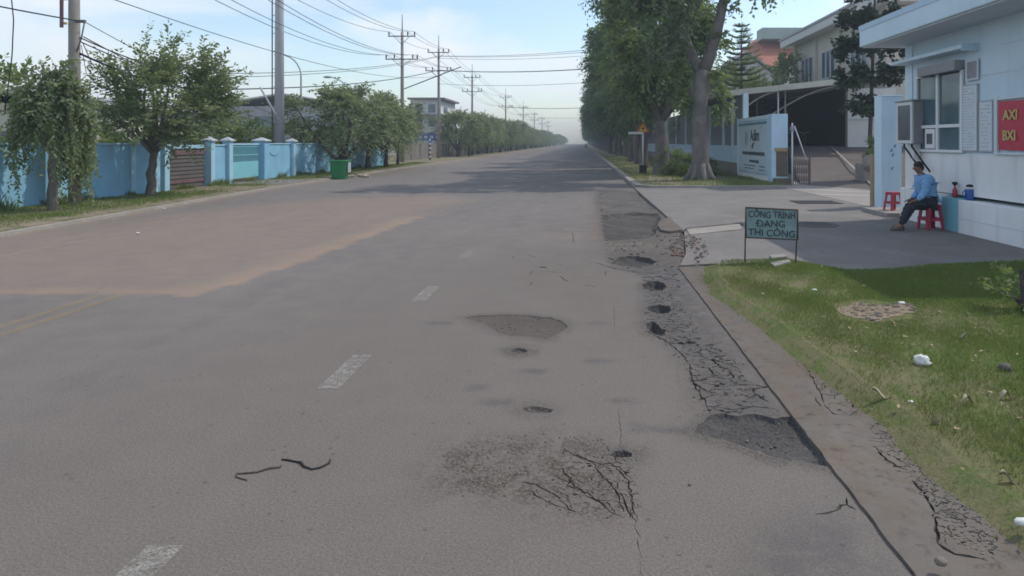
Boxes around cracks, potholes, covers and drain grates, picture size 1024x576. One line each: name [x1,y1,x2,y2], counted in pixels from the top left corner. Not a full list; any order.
crack [815,499,856,515]
pothole [466,314,568,339]
pothole [694,413,829,467]
crack [512,255,680,291]
pothole [613,256,655,267]
pothole [642,281,667,291]
pothole [646,321,666,335]
pothole [647,305,671,314]
crack [517,307,642,575]
crack [644,290,780,414]
